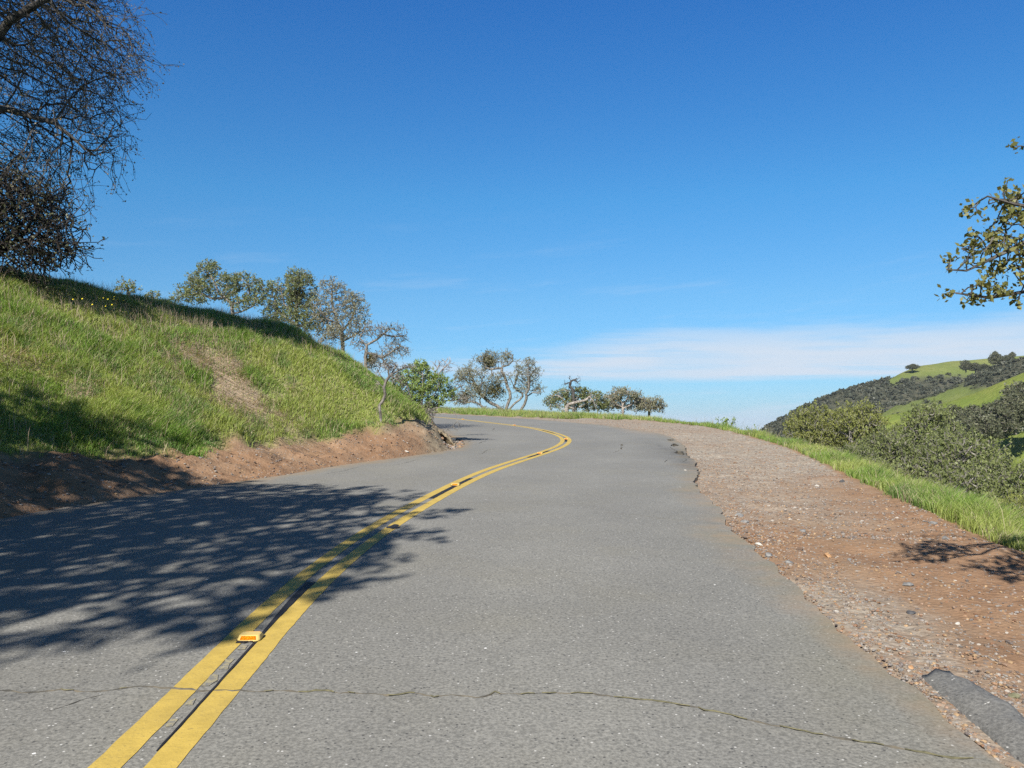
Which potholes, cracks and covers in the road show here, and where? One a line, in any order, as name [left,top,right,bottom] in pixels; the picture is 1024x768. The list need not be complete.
crack [0,686,980,759]
